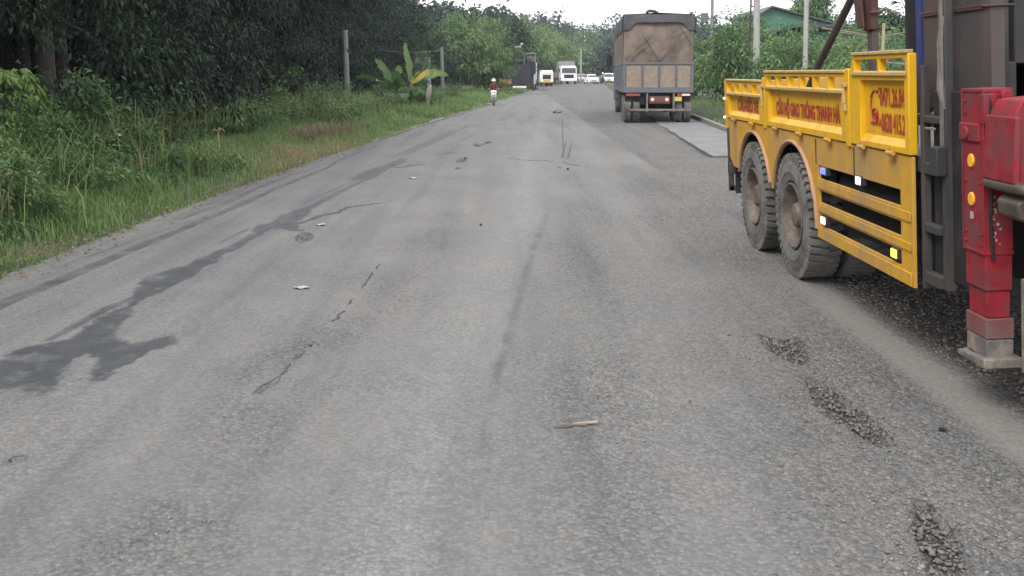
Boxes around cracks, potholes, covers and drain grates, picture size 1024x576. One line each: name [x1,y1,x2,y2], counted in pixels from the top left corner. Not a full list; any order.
pothole [293,232,315,243]
crack [300,203,378,224]
pothole [900,497,978,576]
pothole [756,333,816,368]
pothole [803,376,901,452]
crack [280,265,379,375]
crack [509,119,581,168]
